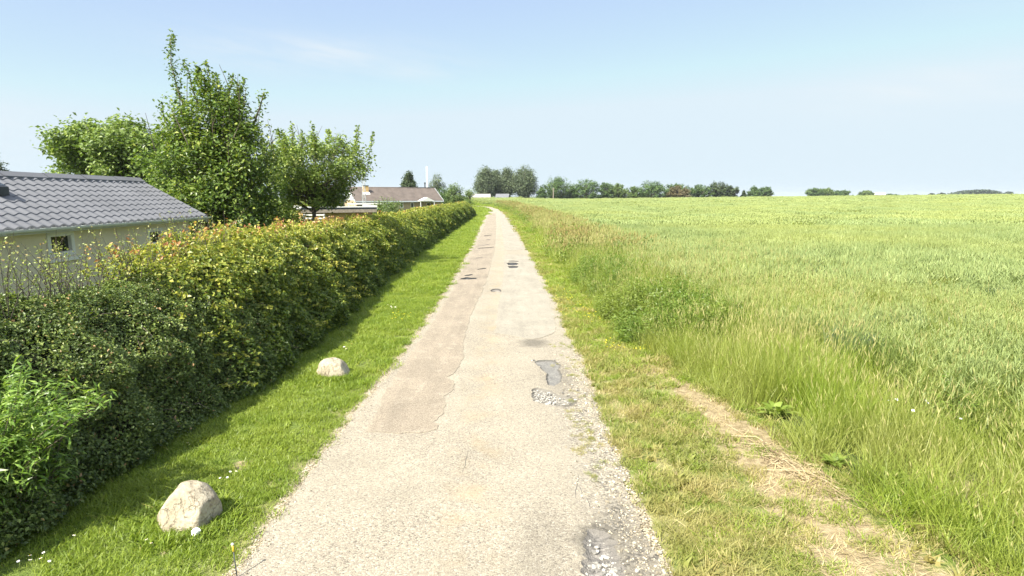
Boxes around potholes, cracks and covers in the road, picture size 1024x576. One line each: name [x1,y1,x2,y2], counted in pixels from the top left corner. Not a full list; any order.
pothole [580,529,626,576]
pothole [535,360,562,386]
pothole [531,388,574,406]
